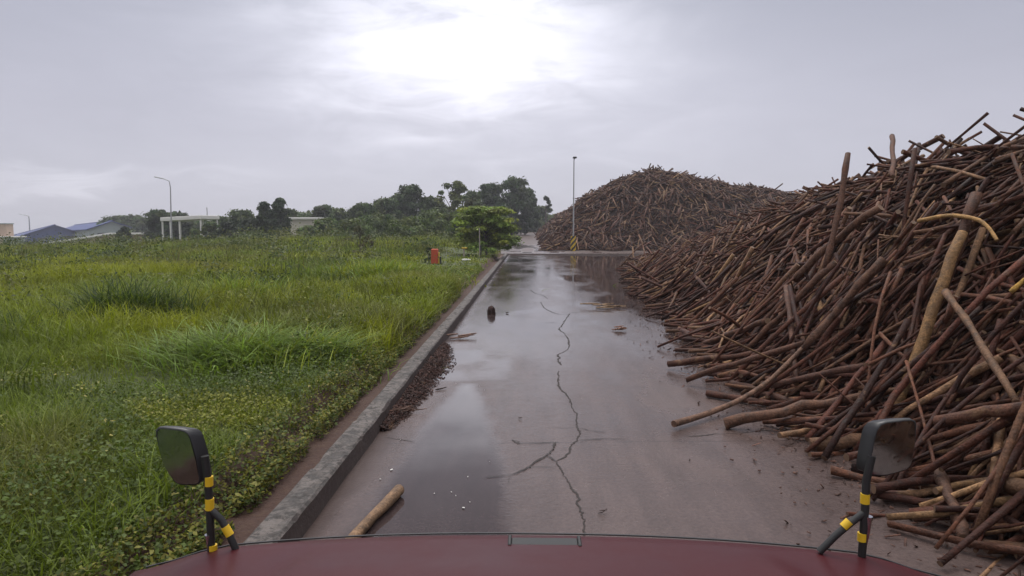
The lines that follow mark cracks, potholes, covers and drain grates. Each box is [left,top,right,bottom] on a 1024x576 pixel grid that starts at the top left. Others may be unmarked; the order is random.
crack [489,290,618,536]
